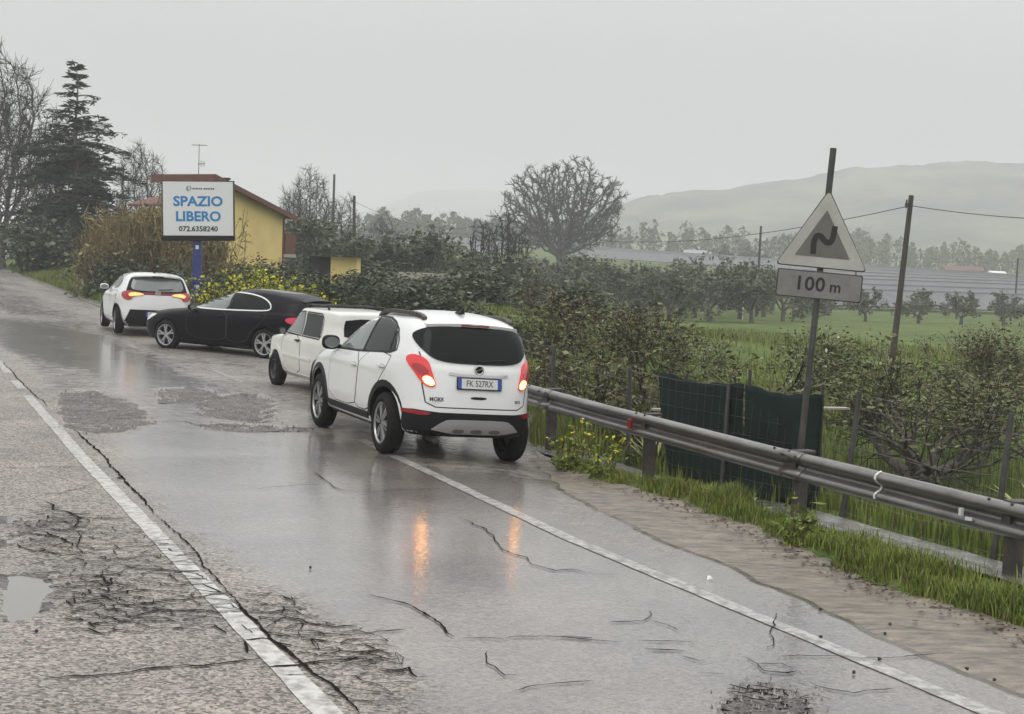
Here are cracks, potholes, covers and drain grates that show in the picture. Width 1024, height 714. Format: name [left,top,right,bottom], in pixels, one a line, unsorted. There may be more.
crack [612,611,939,714]
pothole [716,697,811,714]
crack [2,482,620,703]
pothole [0,572,57,621]
